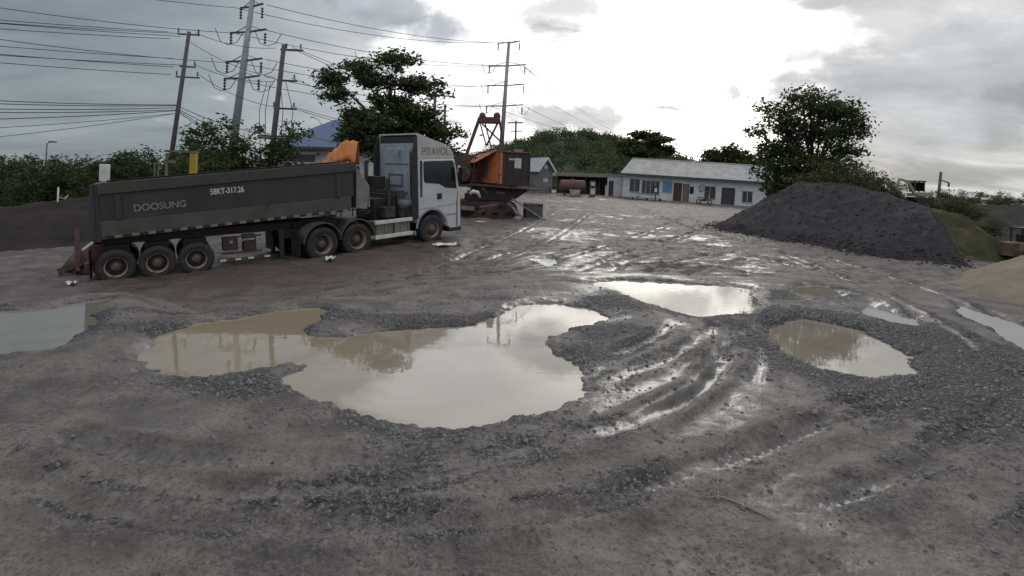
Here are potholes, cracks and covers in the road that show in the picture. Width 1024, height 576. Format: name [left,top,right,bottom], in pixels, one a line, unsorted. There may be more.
pothole [118,297,639,438]
pothole [939,299,1024,351]
pothole [782,280,864,303]
pothole [0,293,124,354]
pothole [737,307,948,387]
pothole [571,276,785,318]
